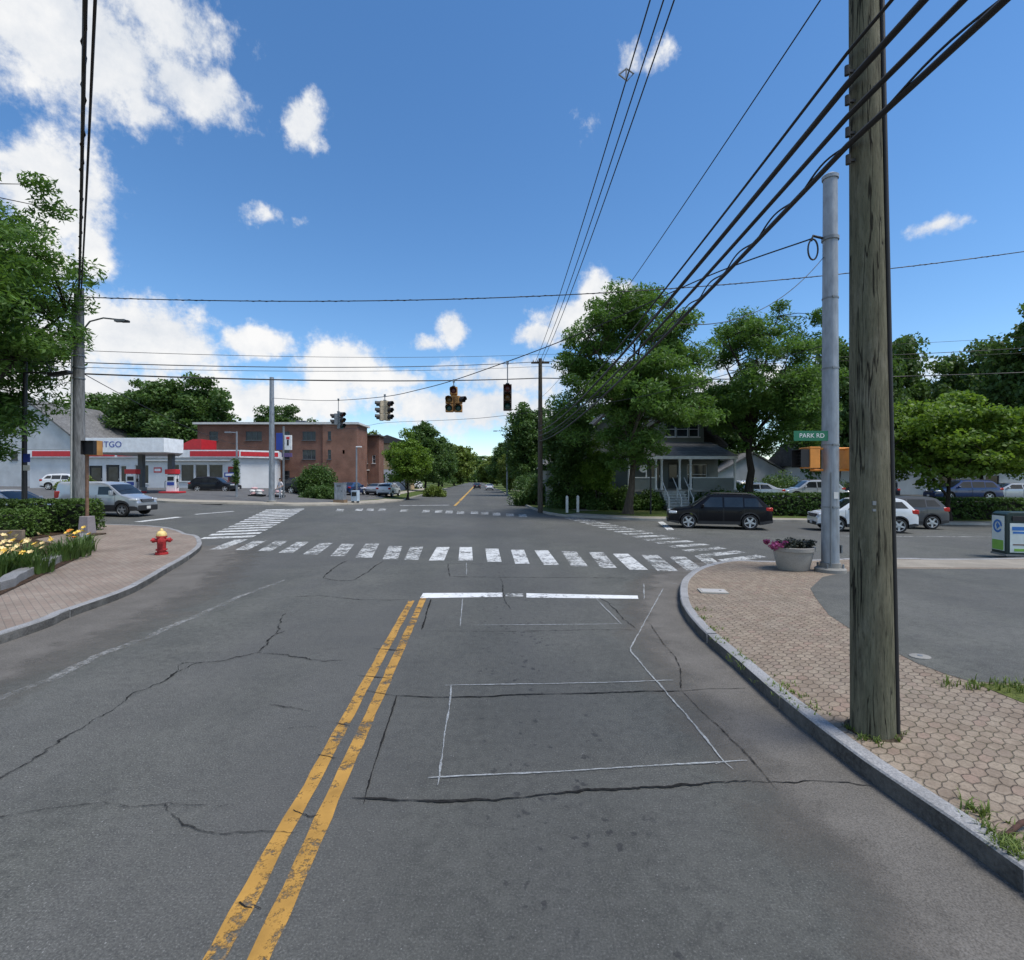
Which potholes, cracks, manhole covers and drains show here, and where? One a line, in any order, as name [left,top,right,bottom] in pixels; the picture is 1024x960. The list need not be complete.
crack [0,614,311,778]
crack [0,802,292,834]
crack [294,561,404,600]
crack [352,597,871,804]
